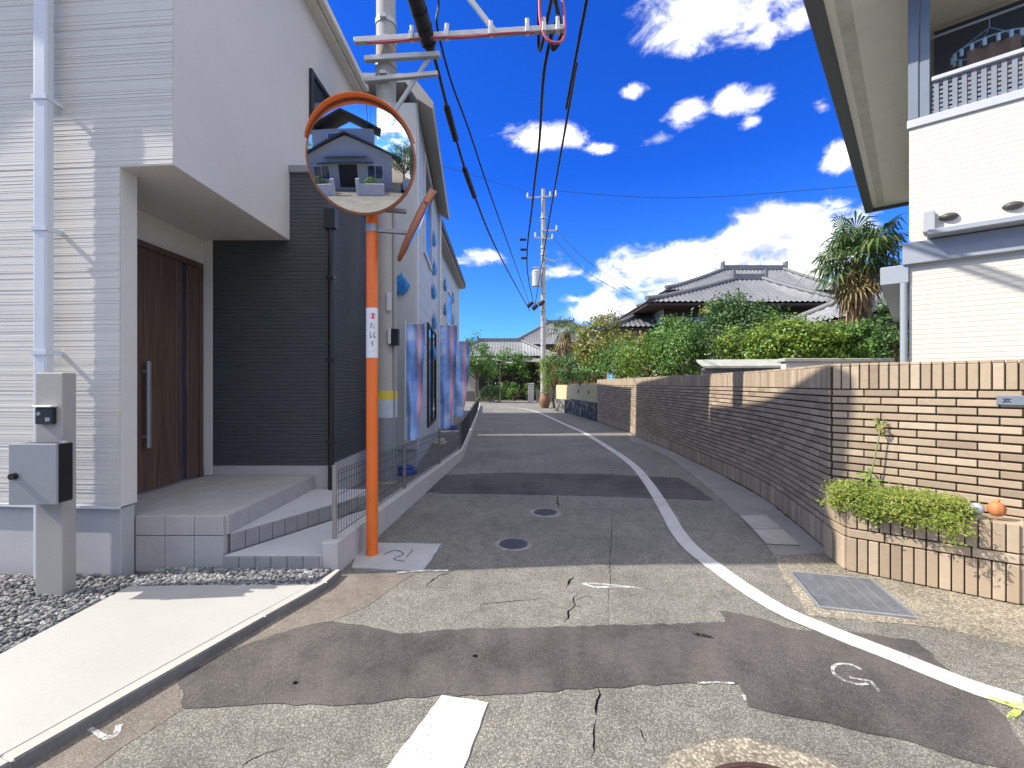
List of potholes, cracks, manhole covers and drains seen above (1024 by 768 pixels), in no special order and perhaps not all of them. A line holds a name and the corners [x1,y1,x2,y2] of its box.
crack [564,577,590,623]
manhole cover [494,538,533,551]
drain grate [789,570,920,619]
manhole cover [660,737,838,768]
manhole cover [529,508,563,518]
crack [592,688,602,756]
